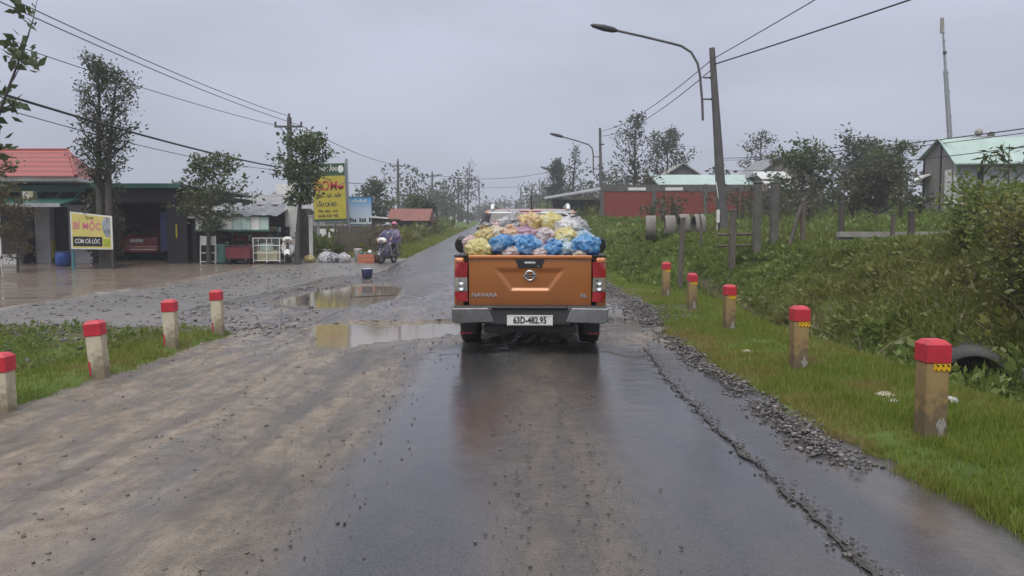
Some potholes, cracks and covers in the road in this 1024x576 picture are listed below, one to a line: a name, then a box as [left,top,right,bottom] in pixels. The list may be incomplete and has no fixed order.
crack [643,347,883,576]
pothole [293,317,461,352]
pothole [266,282,406,310]
